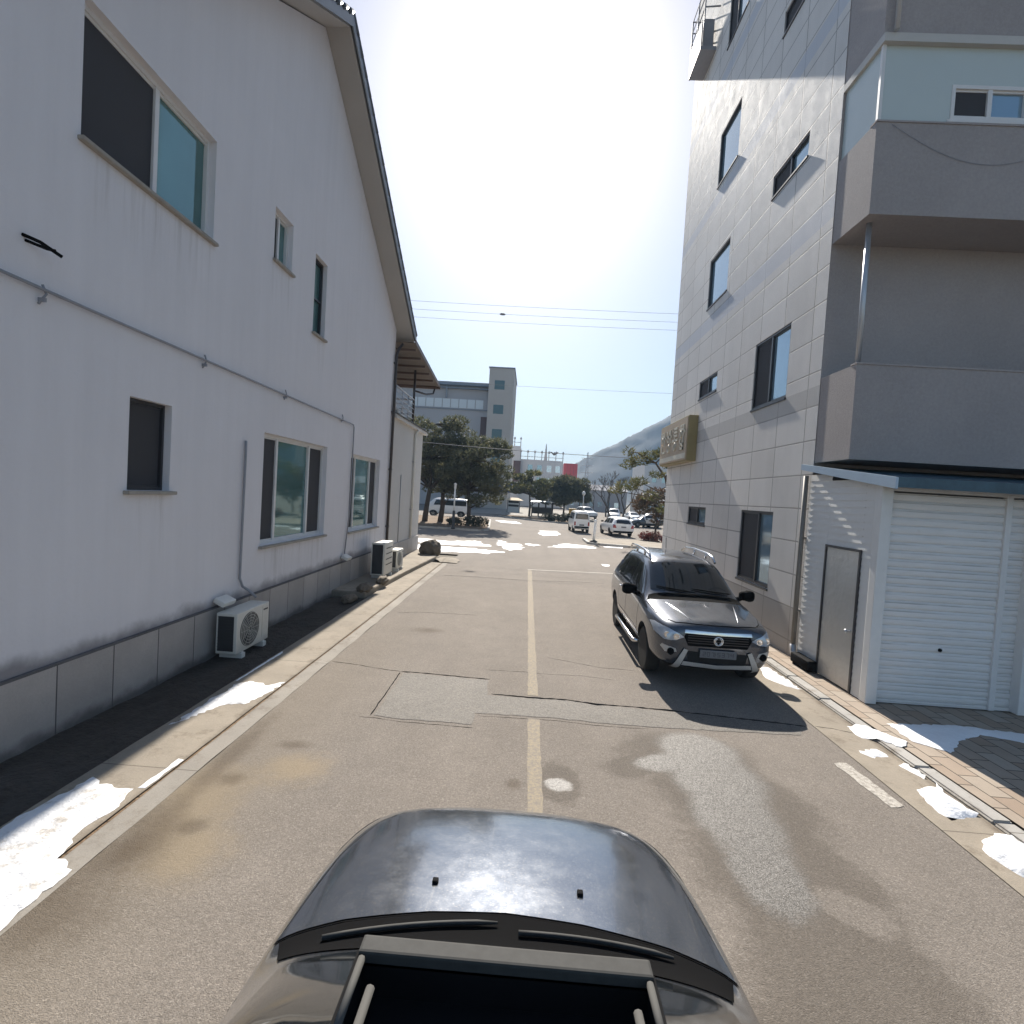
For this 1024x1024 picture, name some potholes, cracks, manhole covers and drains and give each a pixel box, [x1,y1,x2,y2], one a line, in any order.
crack [332,659,851,733]
